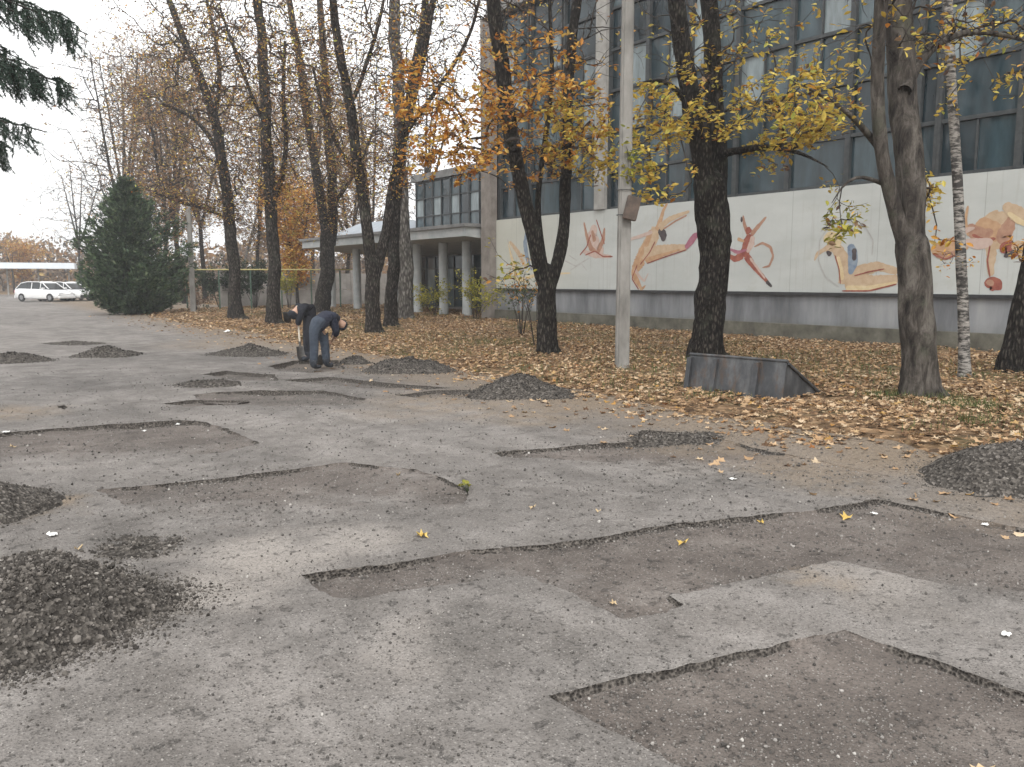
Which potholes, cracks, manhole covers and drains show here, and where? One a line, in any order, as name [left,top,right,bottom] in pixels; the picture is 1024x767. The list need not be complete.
pothole [204,371,279,381]
pothole [97,462,469,529]
pothole [301,499,1024,619]
pothole [0,420,259,471]
pothole [271,360,346,373]
pothole [494,430,889,480]
pothole [193,390,366,406]
pothole [550,630,1024,767]
